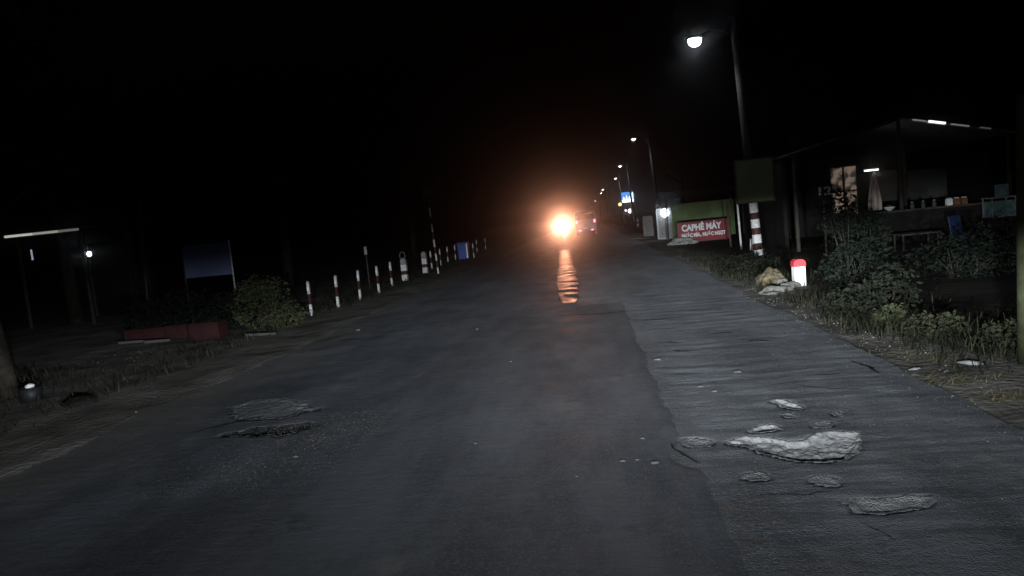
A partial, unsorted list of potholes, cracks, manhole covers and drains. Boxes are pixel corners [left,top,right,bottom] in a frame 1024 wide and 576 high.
pothole [725,431,864,463]
pothole [741,471,771,481]
pothole [769,399,807,410]
pothole [217,422,322,438]
pothole [680,438,714,448]
pothole [808,475,843,487]
pothole [809,421,836,429]
pothole [839,494,939,516]
pothole [747,424,785,433]
crack [792,361,879,389]
pothole [229,398,319,422]
